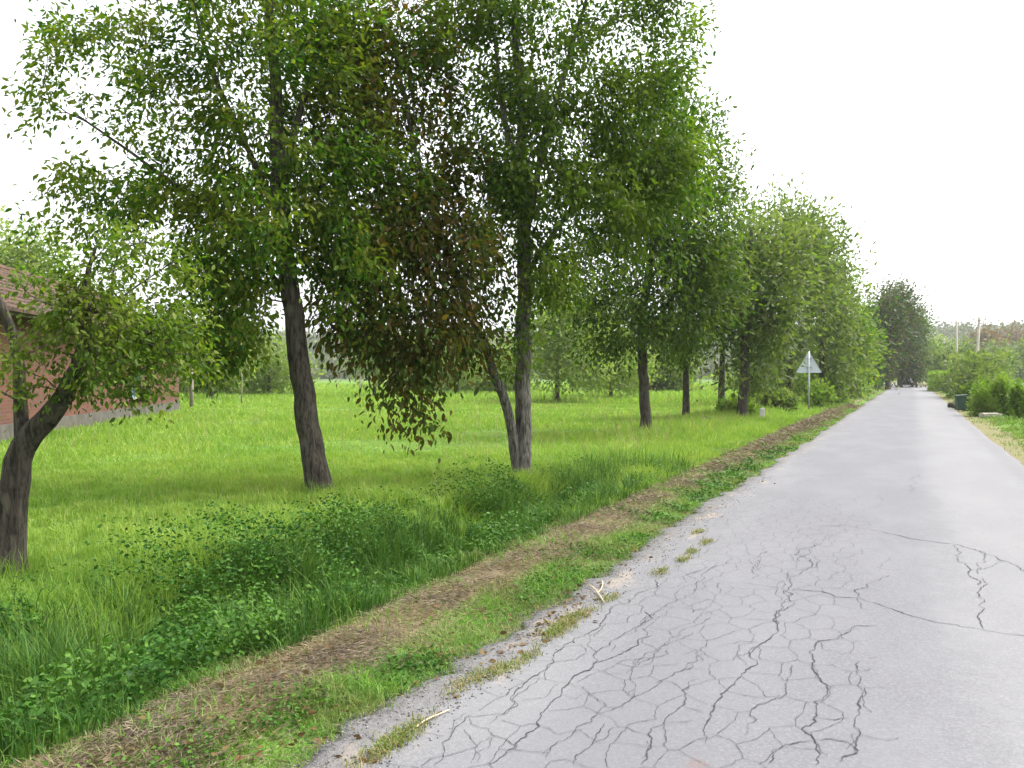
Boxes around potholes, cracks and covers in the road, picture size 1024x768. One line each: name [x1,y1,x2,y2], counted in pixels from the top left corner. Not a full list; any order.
crack [376,491,1024,768]
